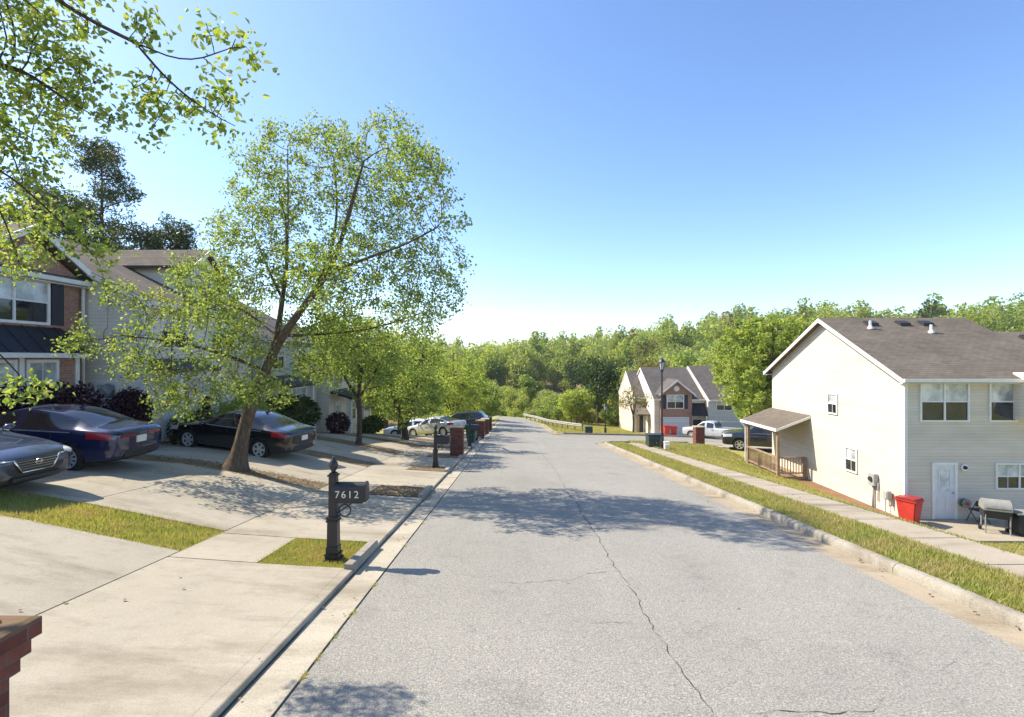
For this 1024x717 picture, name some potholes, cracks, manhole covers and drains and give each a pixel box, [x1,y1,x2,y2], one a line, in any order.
crack [488,447,713,712]
crack [735,698,883,715]
